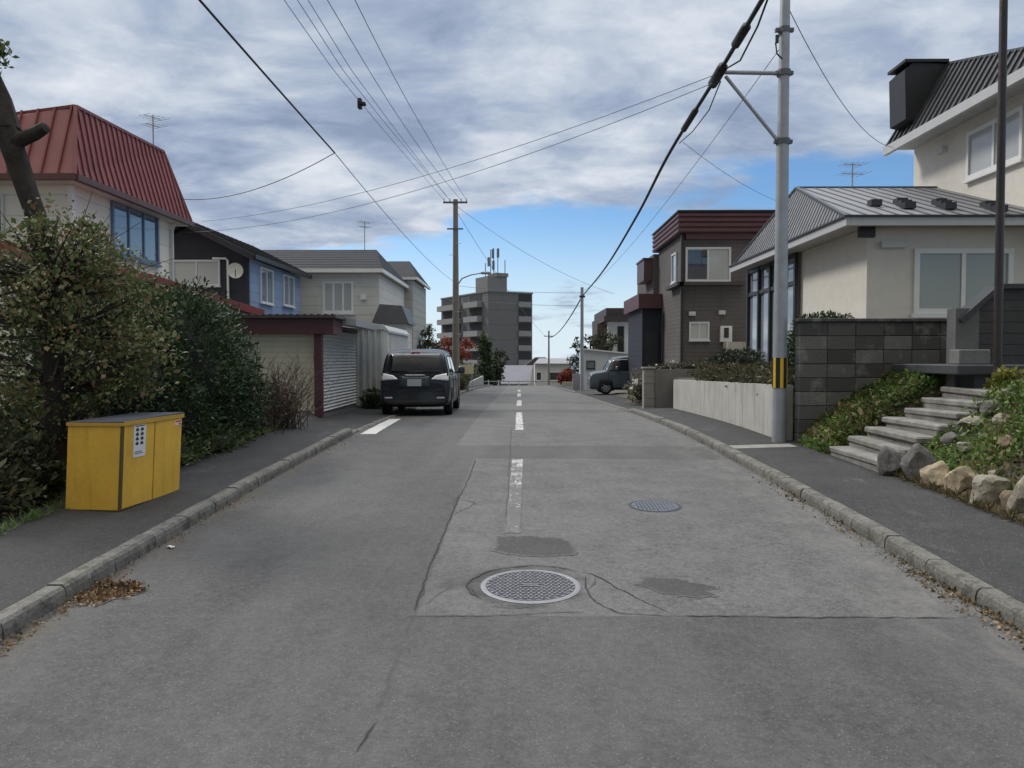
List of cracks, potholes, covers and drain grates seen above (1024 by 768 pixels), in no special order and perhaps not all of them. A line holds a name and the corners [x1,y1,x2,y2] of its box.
manhole cover [481,570,581,604]
crack [413,445,966,618]
manhole cover [628,500,682,512]
